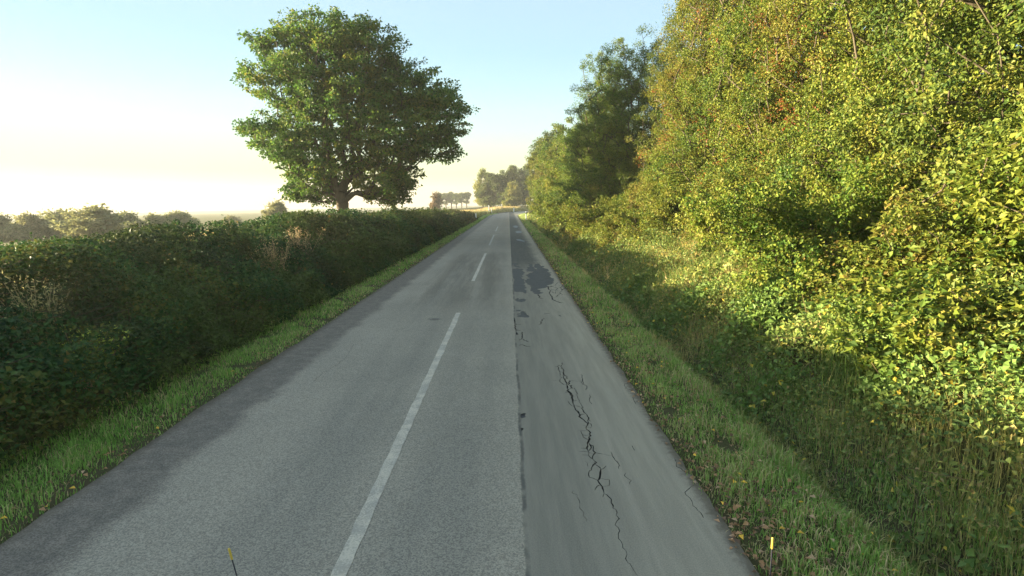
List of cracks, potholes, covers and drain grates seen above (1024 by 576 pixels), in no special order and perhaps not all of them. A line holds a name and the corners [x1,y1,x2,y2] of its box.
crack [554,365,638,576]
